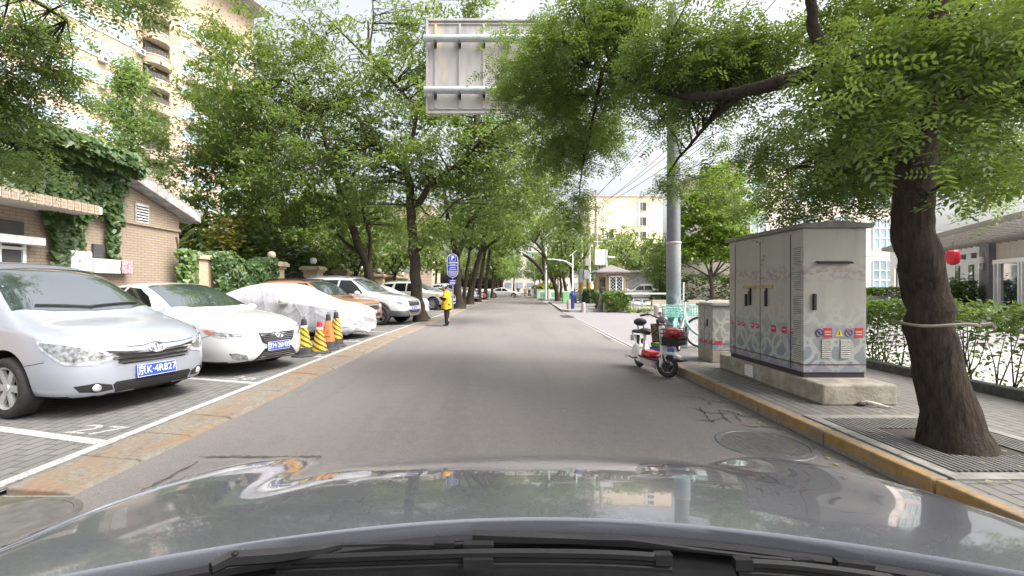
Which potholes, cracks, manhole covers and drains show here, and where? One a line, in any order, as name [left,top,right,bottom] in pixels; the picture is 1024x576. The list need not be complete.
crack [677,395,779,429]
manhole cover [714,429,819,461]
